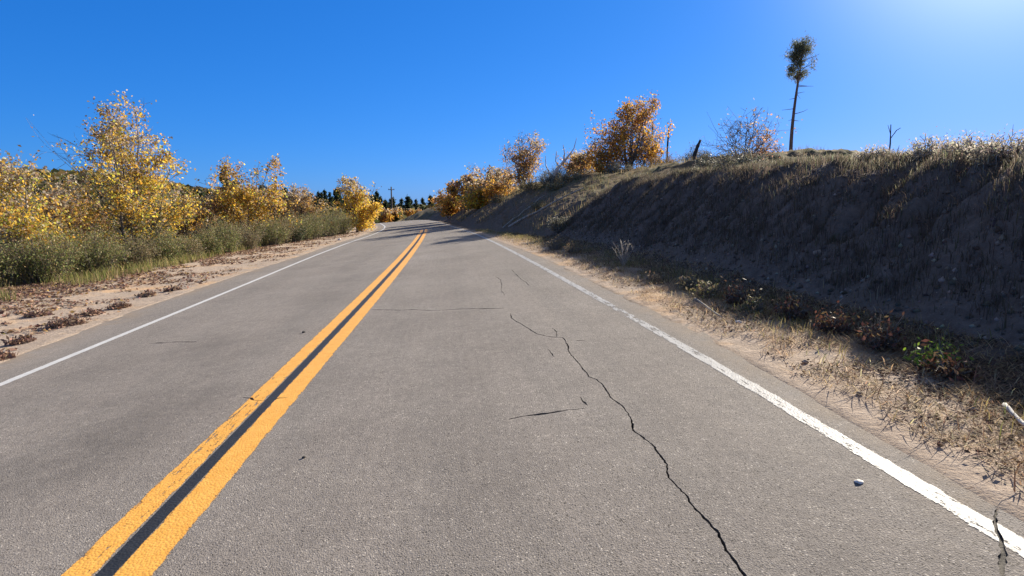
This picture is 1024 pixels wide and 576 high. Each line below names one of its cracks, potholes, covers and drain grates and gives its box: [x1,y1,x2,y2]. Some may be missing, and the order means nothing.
crack [410,308,747,576]
crack [992,510,1008,576]
